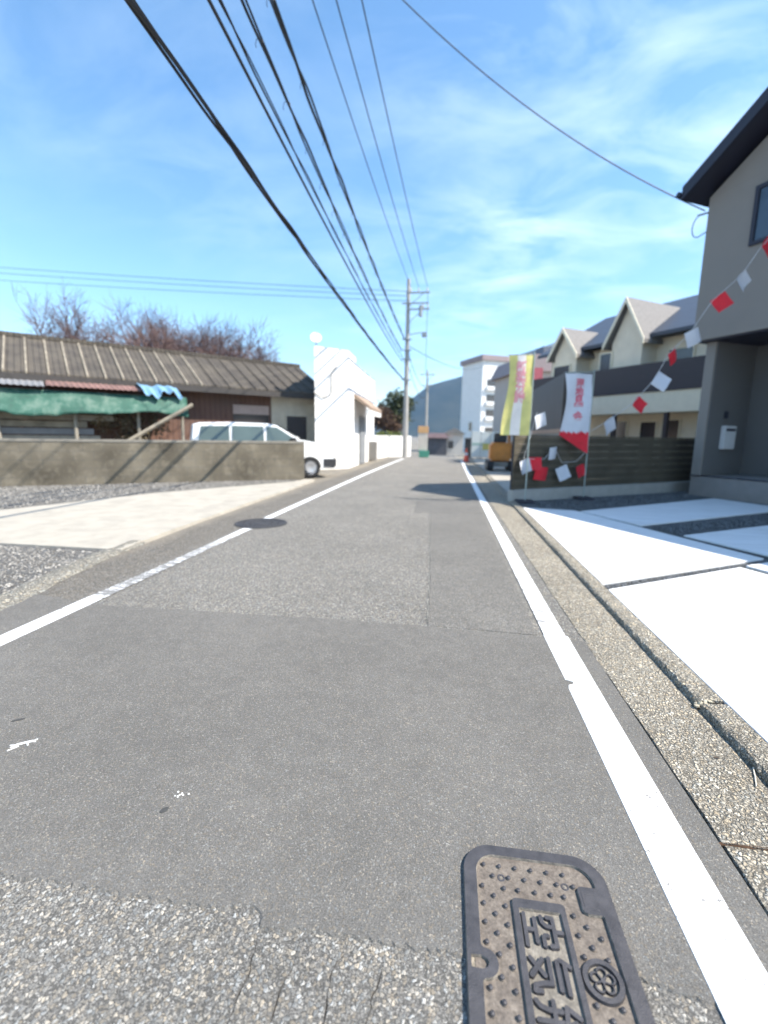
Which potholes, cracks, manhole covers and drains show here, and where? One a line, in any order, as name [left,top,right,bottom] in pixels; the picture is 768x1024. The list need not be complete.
crack [323,952,346,1024]
crack [365,966,383,1024]
manhole cover [234,518,287,529]
manhole cover [463,845,656,1024]
crack [227,942,297,1024]
